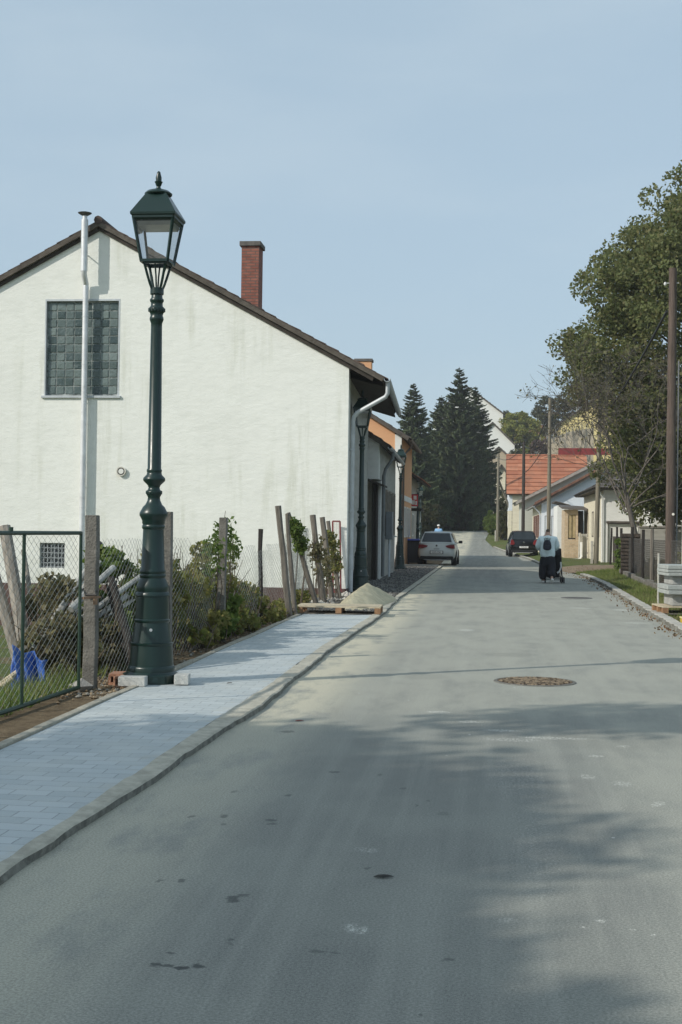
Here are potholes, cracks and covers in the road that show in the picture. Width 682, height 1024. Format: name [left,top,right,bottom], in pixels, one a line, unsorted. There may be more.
manhole cover [494,676,577,687]
